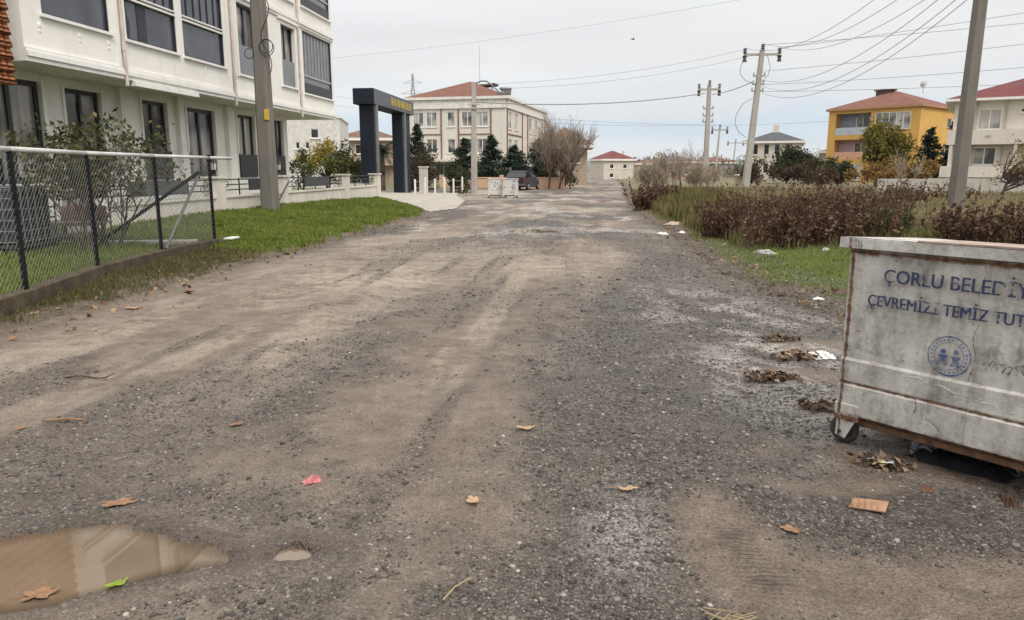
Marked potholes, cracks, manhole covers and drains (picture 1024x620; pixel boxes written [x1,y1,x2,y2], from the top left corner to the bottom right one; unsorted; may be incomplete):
pothole [0,504,277,620]
